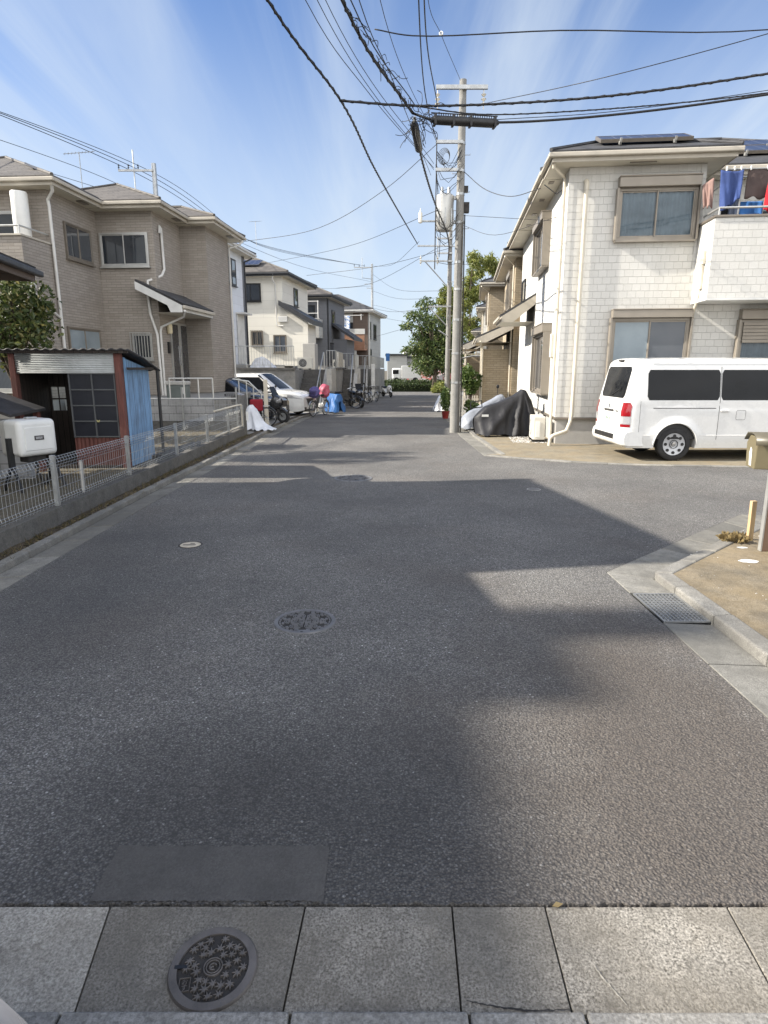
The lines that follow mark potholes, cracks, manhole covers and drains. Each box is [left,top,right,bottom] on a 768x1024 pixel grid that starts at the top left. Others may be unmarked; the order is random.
crack [467,1000,569,1012]
crack [594,965,627,1005]
manhole cover [274,609,336,634]
drain grate [633,593,710,625]
manhole cover [167,927,258,1012]
